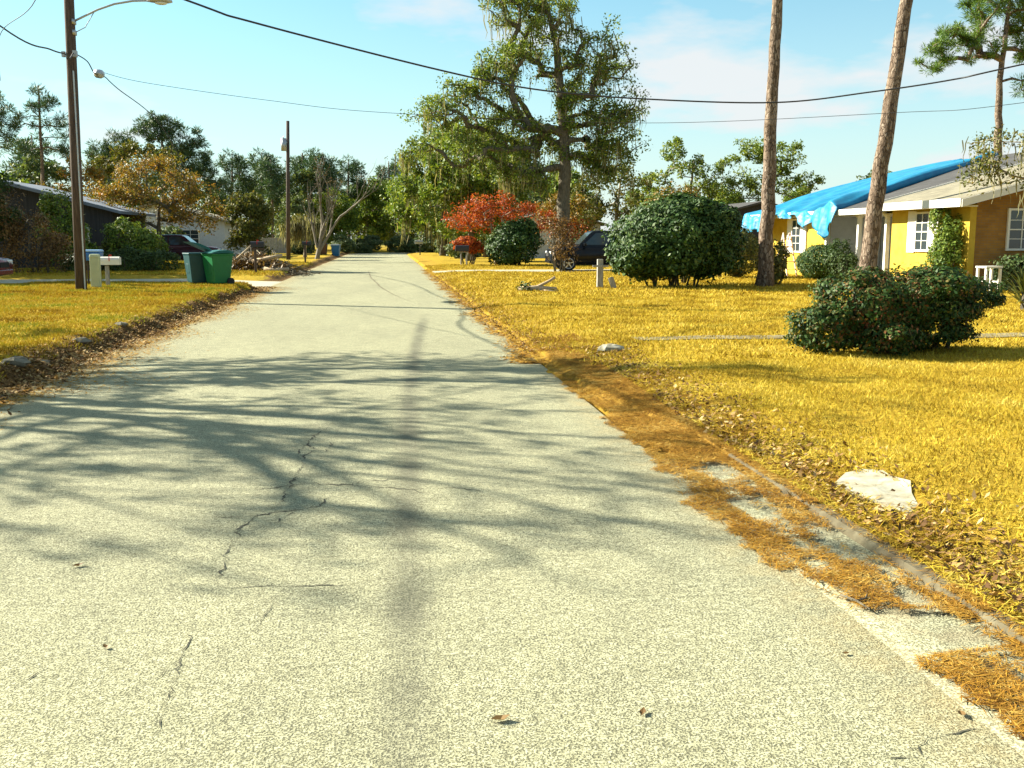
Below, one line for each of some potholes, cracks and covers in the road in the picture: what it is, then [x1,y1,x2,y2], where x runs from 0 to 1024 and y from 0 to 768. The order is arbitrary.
crack [89,631,192,741]
crack [196,427,479,630]
